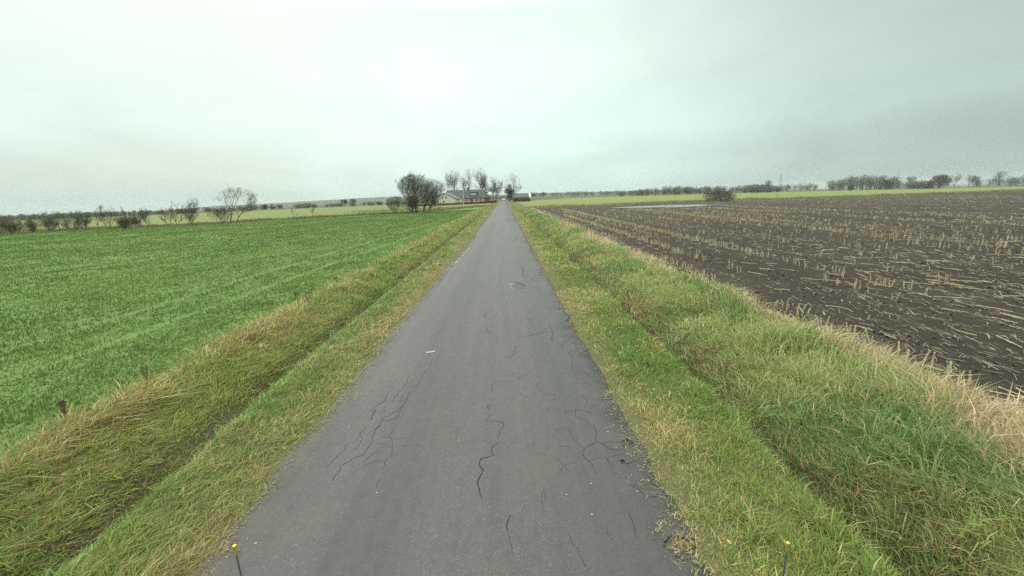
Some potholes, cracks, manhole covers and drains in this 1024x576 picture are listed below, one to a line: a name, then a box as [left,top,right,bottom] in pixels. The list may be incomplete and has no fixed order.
crack [477,381,504,498]
crack [483,312,659,502]
crack [329,361,432,481]
